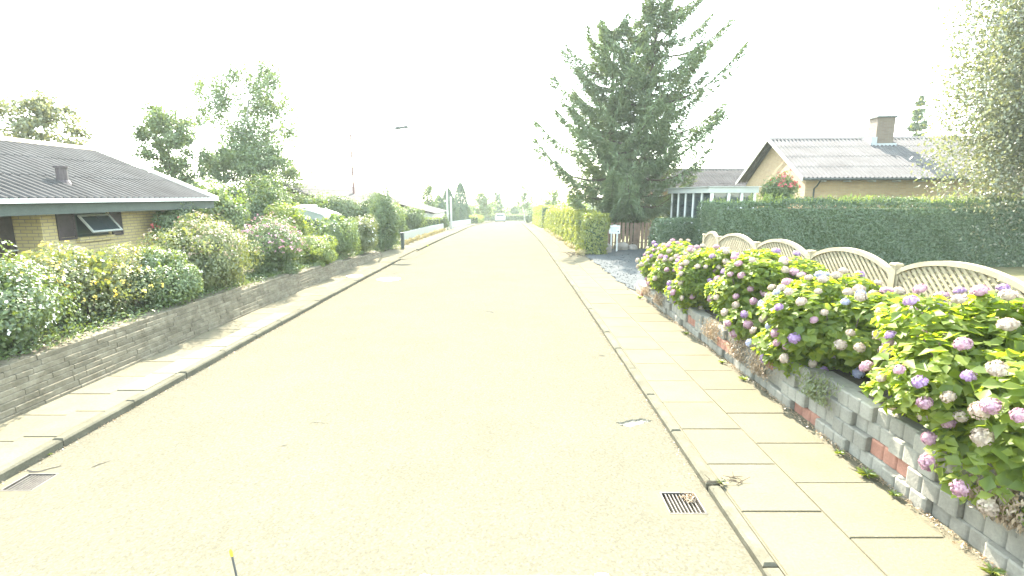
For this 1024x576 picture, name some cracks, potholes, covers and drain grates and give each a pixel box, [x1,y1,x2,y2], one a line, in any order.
pothole [614,418,658,429]
drain grate [647,487,711,520]
drain grate [0,468,62,498]
